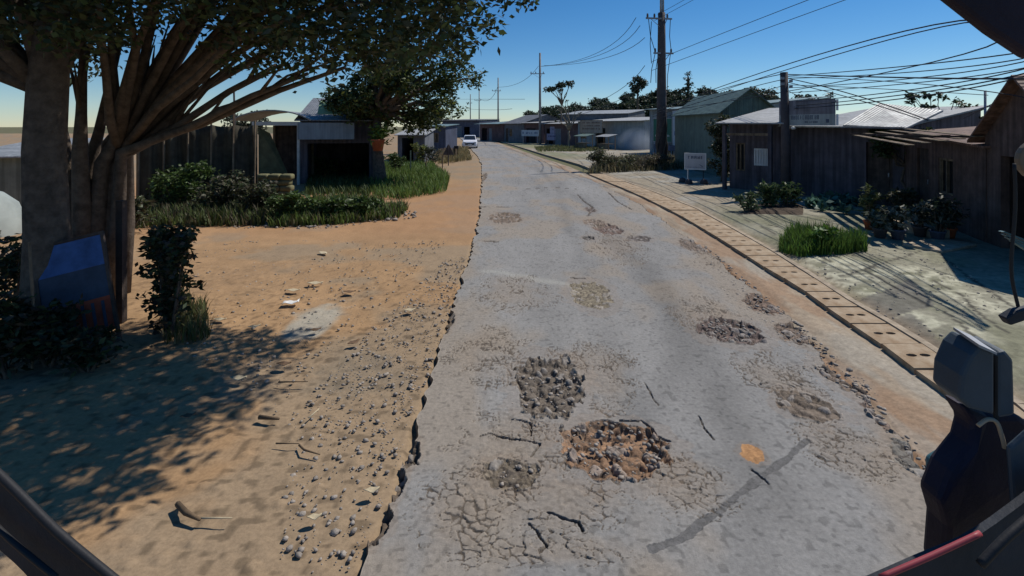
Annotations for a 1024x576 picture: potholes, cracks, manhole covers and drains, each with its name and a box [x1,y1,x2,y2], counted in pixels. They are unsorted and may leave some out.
pothole [479,457,542,492]
pothole [510,353,586,433]
crack [729,349,835,403]
crack [526,187,632,216]
pothole [695,316,768,345]
pothole [556,419,674,483]
pothole [775,389,844,423]
crack [403,341,741,571]
crack [786,421,902,486]
